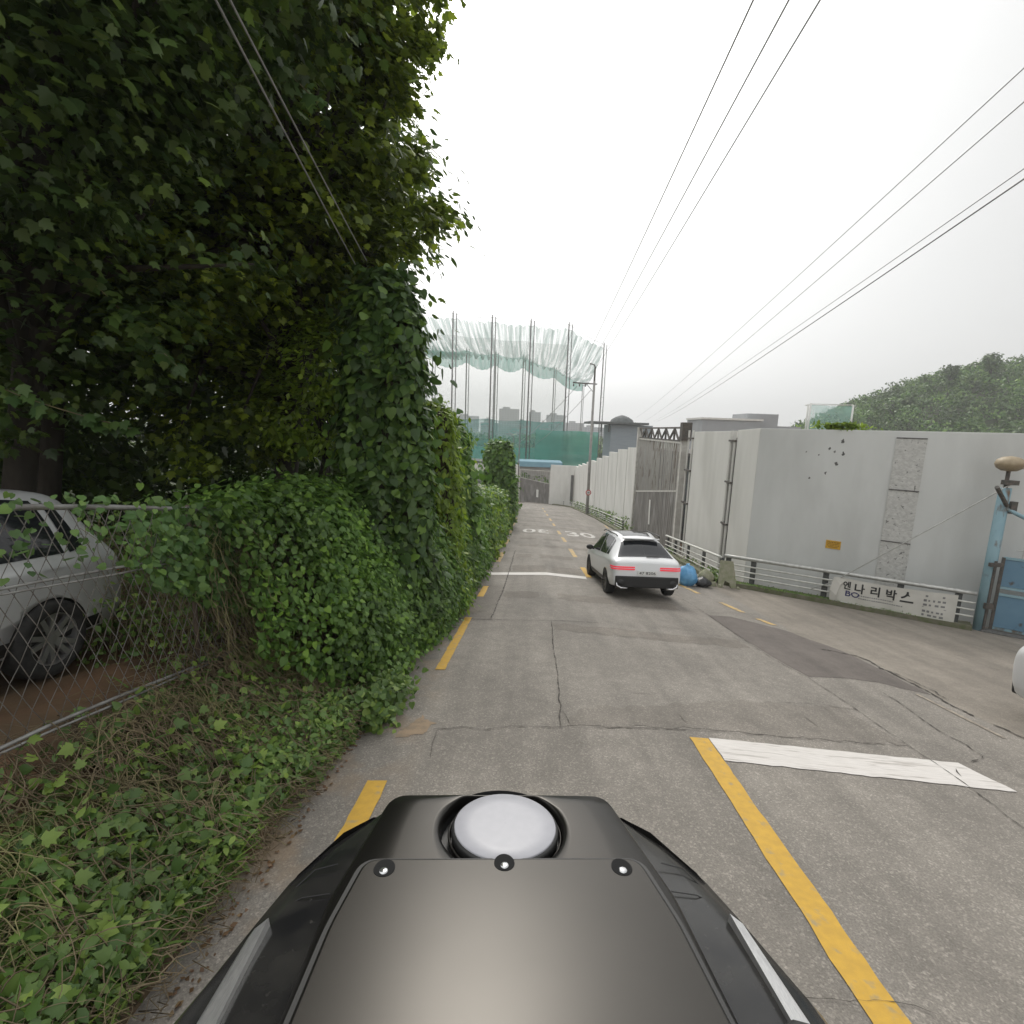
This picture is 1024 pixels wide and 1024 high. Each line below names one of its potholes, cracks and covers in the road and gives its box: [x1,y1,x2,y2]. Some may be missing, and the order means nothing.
crack [823,649,974,716]
crack [430,622,909,757]
